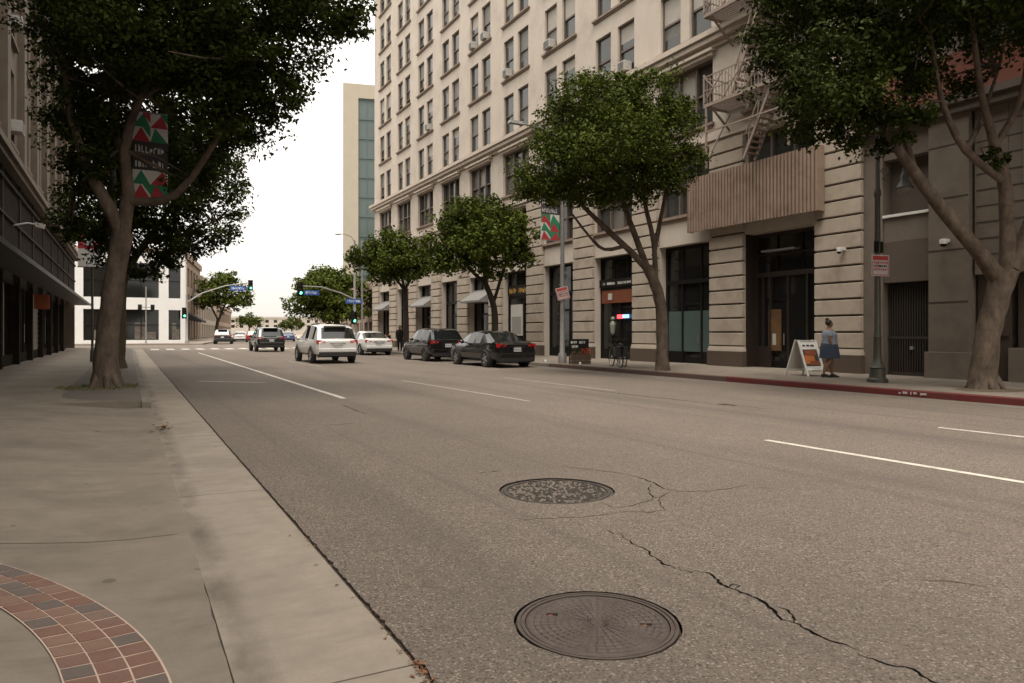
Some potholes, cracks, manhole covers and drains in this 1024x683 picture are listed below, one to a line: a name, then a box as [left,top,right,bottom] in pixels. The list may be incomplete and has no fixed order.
crack [621,533,937,683]
manhole cover [515,592,681,660]
manhole cover [500,479,614,504]
crack [535,466,747,534]
